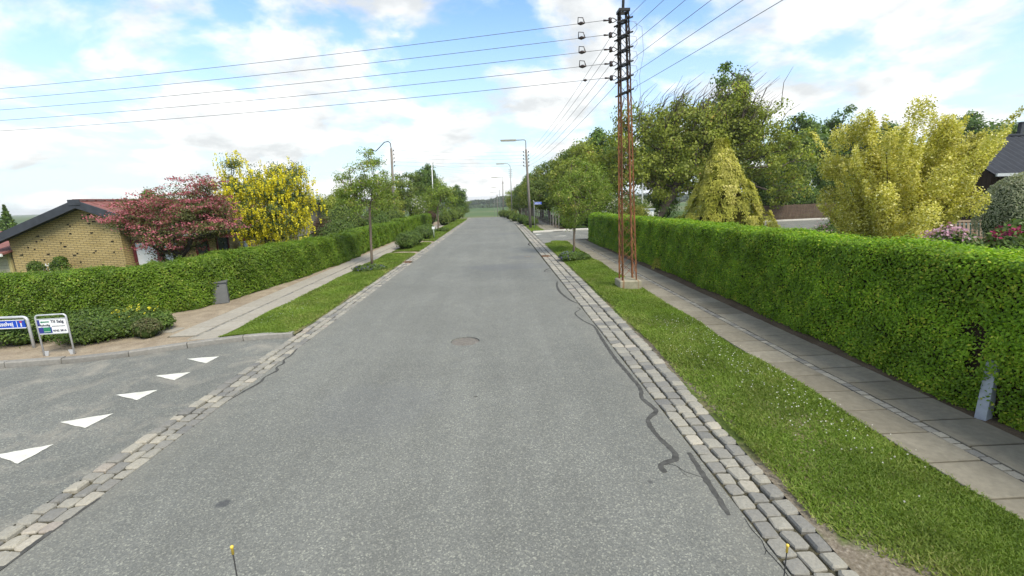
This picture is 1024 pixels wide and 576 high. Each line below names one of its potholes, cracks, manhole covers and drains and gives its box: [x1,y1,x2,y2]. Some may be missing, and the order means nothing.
manhole cover [452,338,479,346]
